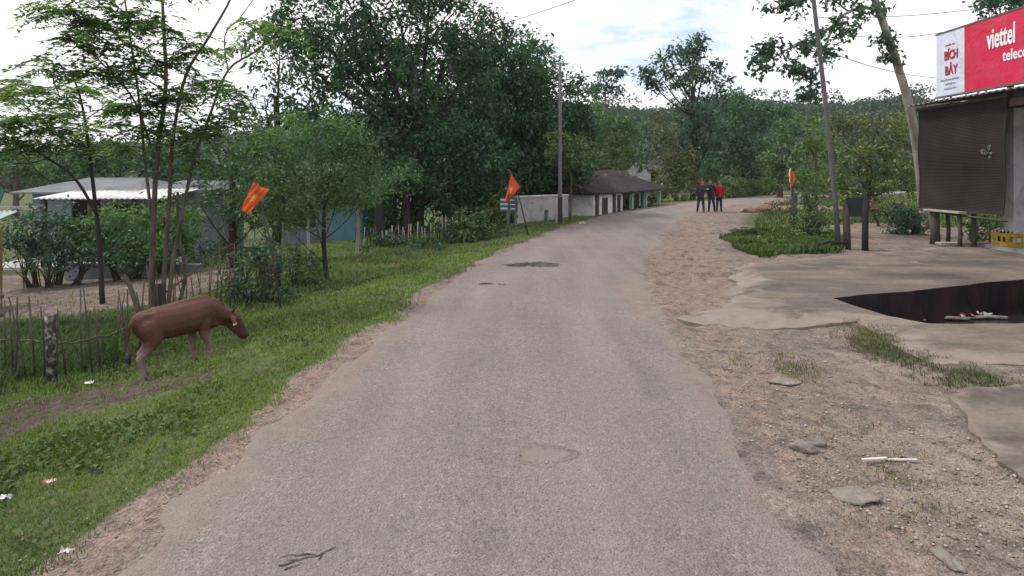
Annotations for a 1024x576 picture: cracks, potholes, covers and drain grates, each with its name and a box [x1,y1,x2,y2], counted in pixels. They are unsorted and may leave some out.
crack [279,547,334,570]
pothole [508,442,583,467]
